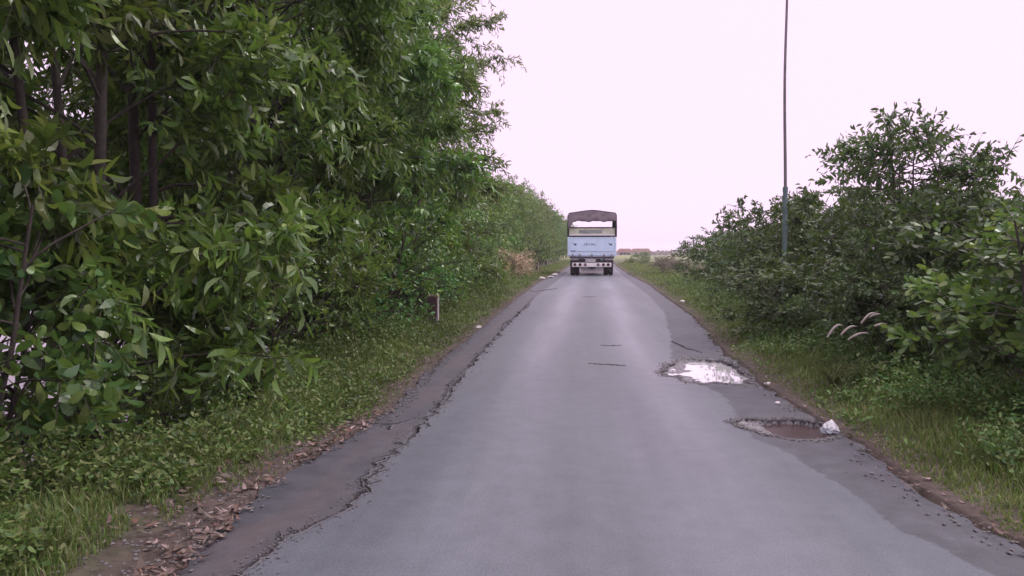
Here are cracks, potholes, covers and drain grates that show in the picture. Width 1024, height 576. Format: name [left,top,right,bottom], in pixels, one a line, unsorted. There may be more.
pothole [729,418,842,441]
pothole [655,358,756,387]
crack [230,288,557,576]
